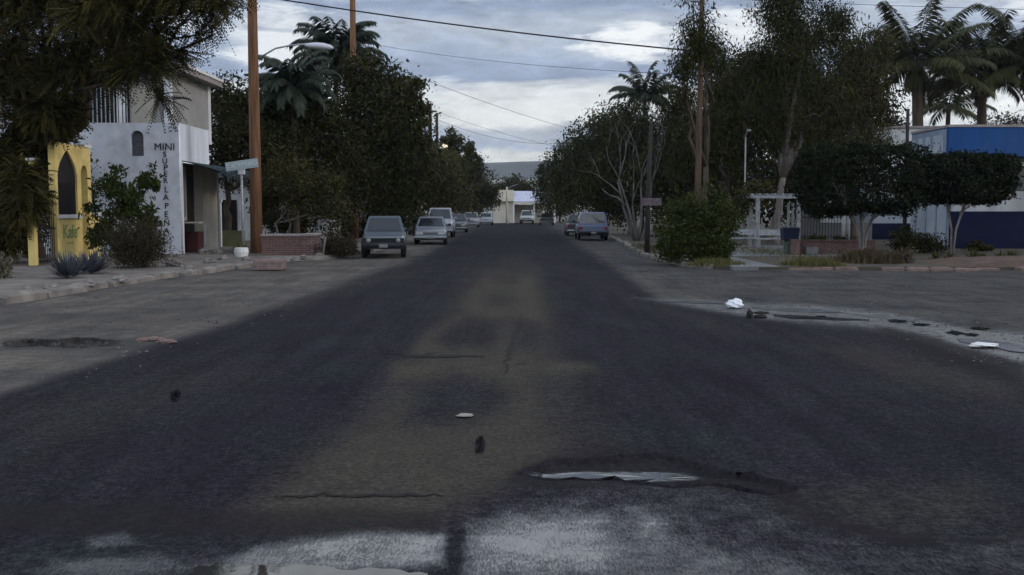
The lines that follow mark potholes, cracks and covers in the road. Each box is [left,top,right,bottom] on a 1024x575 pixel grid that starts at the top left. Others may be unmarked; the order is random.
pothole [476,436,484,454]
pothole [520,452,800,494]
crack [503,314,526,374]
pothole [3,337,121,348]
crack [275,491,445,499]
